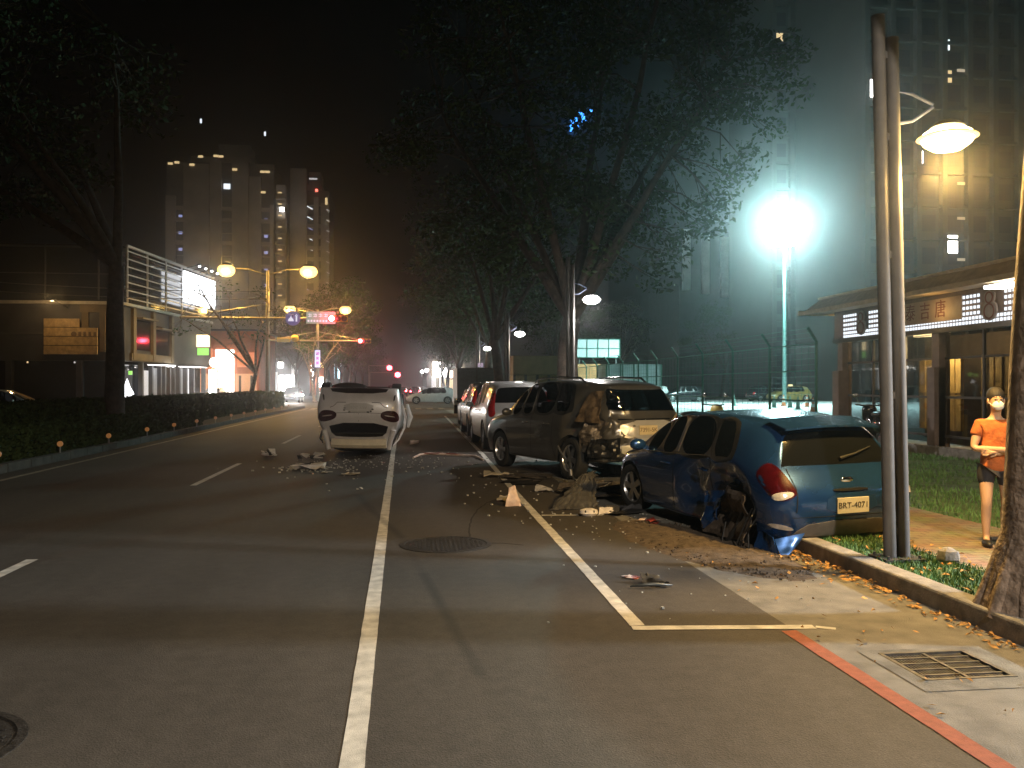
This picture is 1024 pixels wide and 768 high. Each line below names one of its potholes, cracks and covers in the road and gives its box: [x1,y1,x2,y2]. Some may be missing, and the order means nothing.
manhole cover [400,536,491,553]
manhole cover [0,712,29,759]
drain grate [878,649,1018,681]
